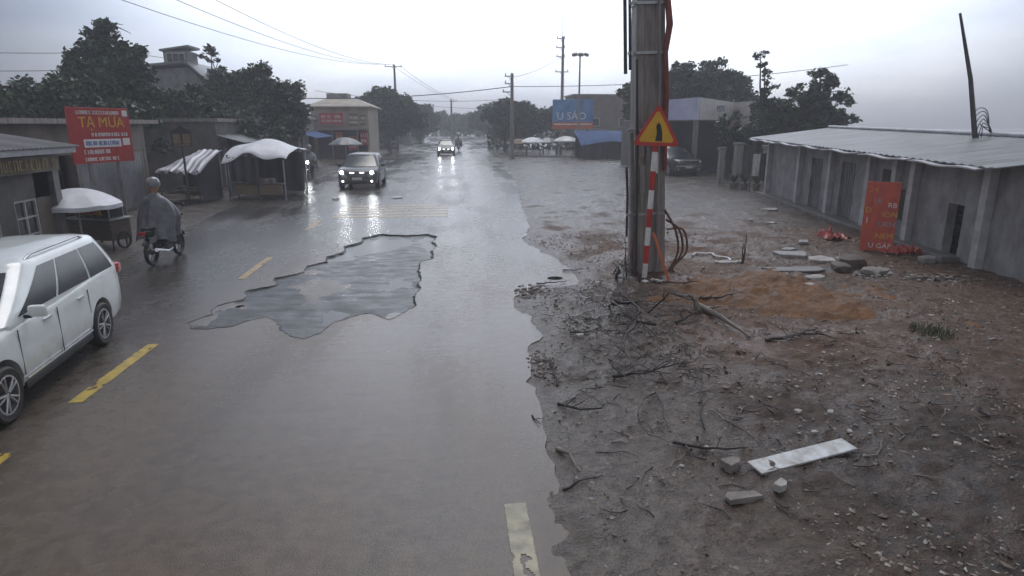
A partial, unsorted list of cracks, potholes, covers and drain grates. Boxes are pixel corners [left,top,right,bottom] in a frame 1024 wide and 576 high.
pothole [187,234,438,339]
